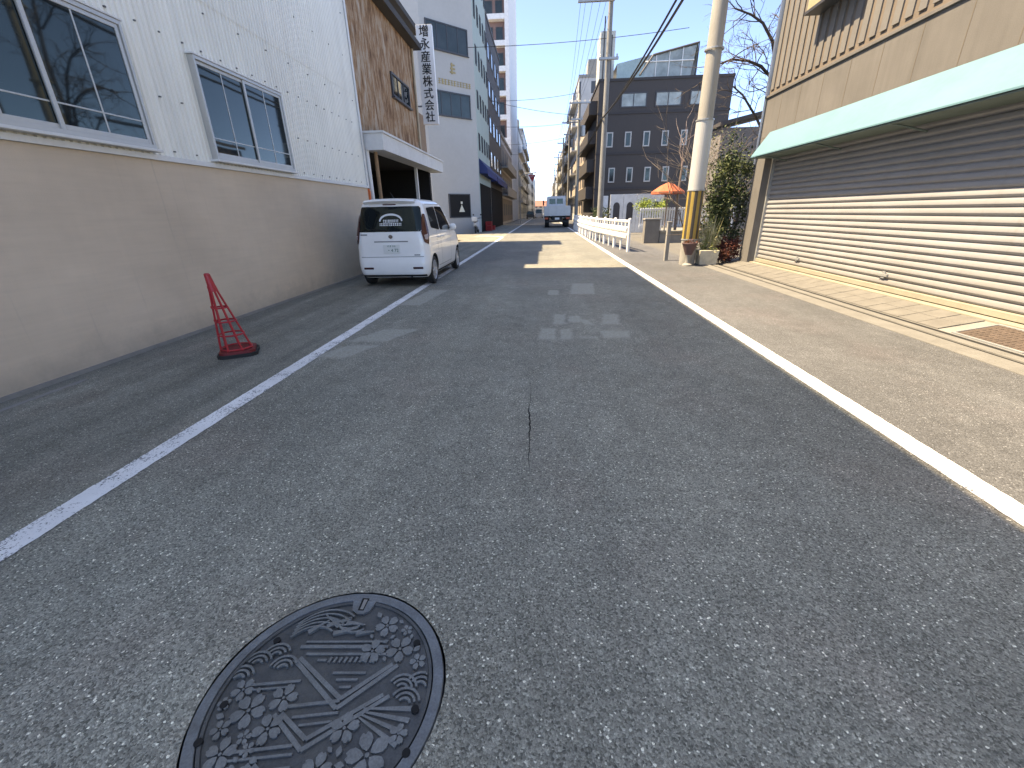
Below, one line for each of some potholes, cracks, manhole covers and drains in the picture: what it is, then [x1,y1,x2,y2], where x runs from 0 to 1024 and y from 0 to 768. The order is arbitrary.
manhole cover [179,594,445,768]
